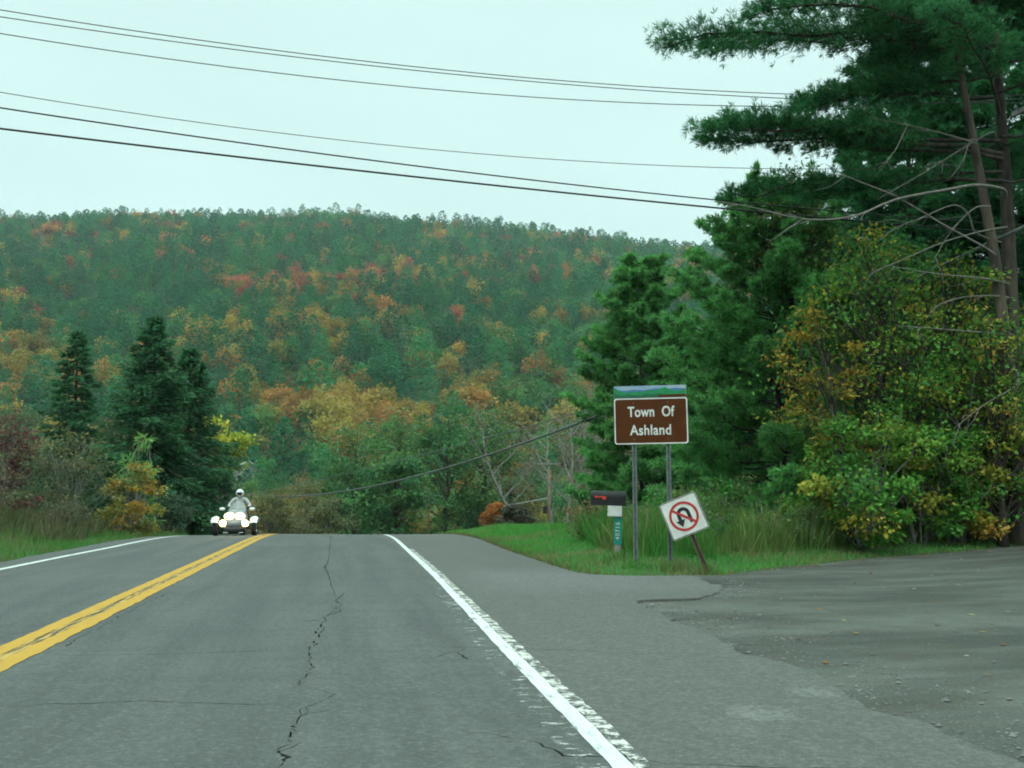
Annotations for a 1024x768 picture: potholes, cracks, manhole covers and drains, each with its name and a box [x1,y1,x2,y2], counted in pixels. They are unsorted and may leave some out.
crack [489,733,868,768]
crack [56,535,388,768]
